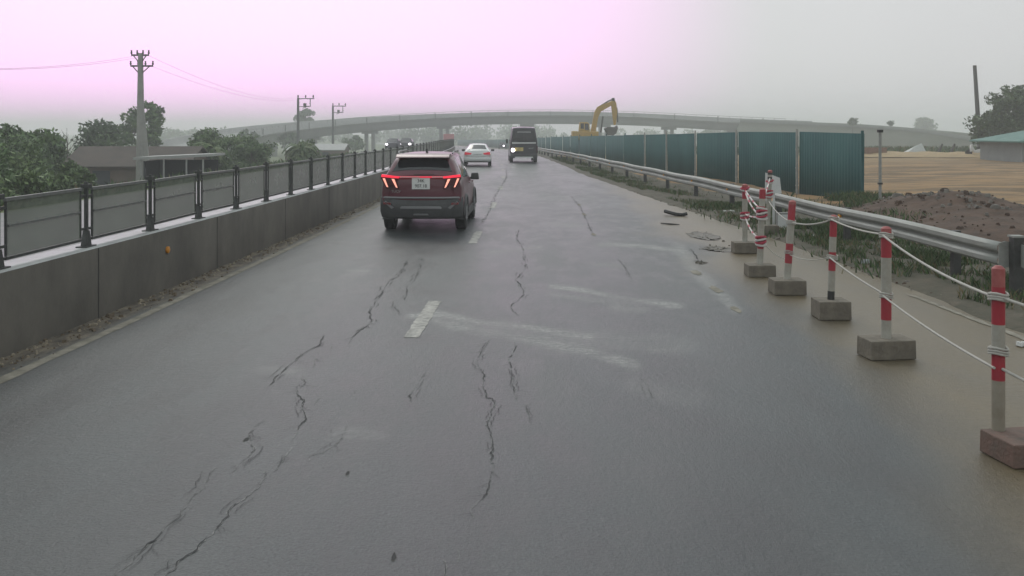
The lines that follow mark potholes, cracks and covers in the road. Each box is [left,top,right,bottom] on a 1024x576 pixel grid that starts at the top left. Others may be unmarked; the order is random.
crack [113,335,347,576]
crack [511,230,529,315]
crack [343,258,424,345]
crack [462,339,533,518]
